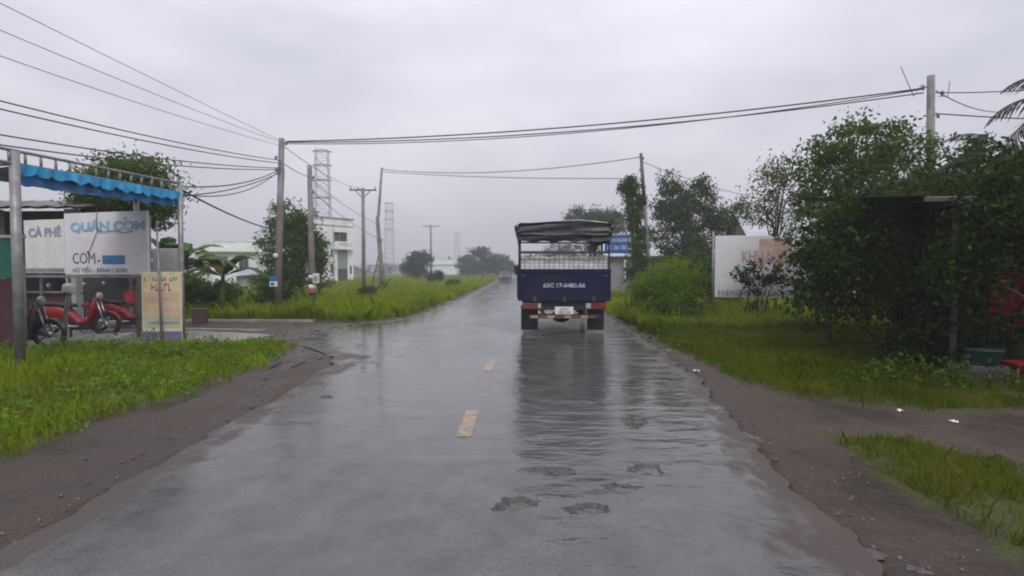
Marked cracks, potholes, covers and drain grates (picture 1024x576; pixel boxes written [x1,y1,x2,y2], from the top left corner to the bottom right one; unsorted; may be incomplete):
pothole [626,463,664,475]
pothole [561,502,611,515]
pothole [519,466,578,477]
pothole [600,482,645,491]
pothole [490,496,541,511]
pothole [622,419,650,430]
